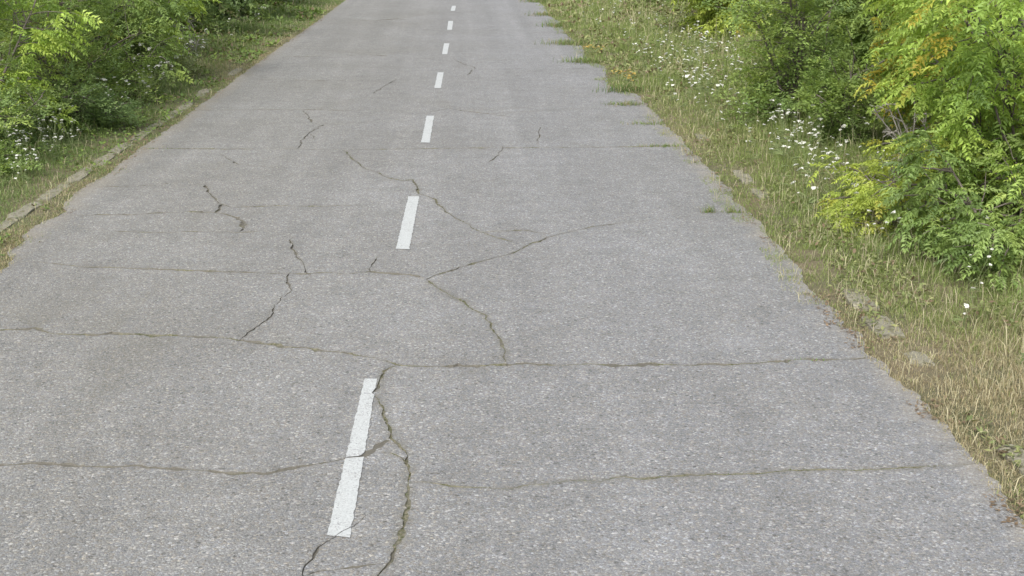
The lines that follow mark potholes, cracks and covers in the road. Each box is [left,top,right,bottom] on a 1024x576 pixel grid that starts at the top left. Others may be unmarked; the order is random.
crack [429,463,982,489]
crack [151,109,686,168]
crack [0,152,866,576]
